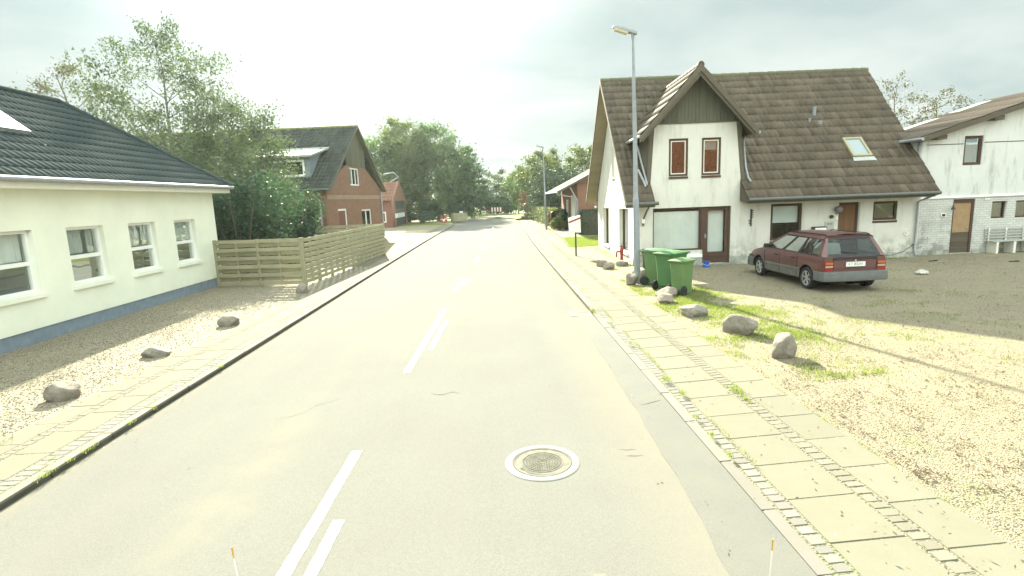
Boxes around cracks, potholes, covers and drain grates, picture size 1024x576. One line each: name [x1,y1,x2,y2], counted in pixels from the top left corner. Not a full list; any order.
manhole cover [505,445,580,482]
